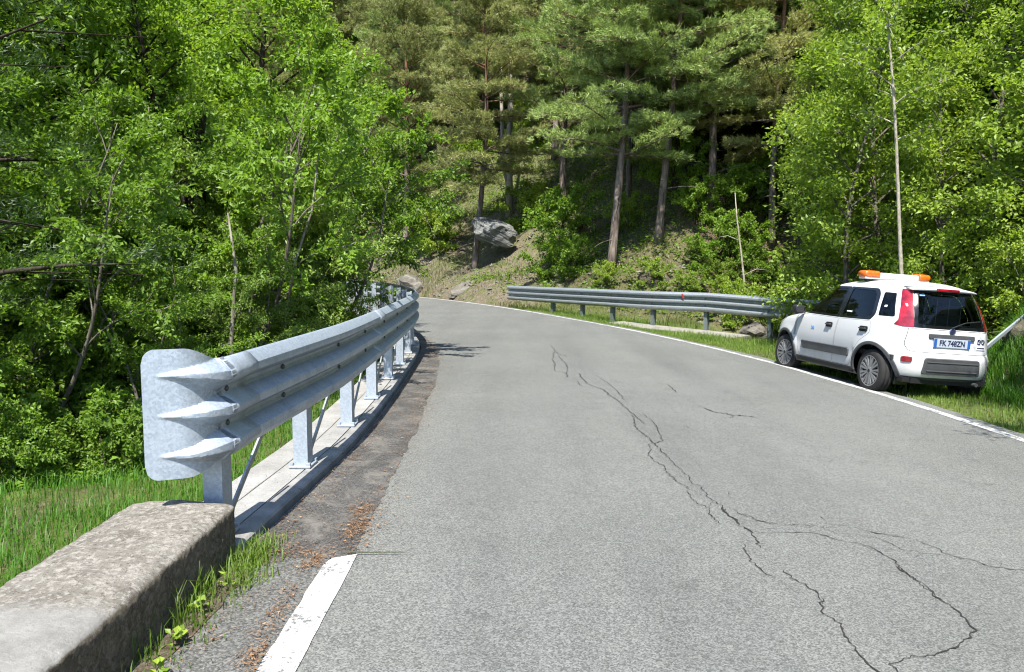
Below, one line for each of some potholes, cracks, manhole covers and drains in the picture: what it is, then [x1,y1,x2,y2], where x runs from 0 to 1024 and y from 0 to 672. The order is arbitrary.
crack [577,374,1022,672]
